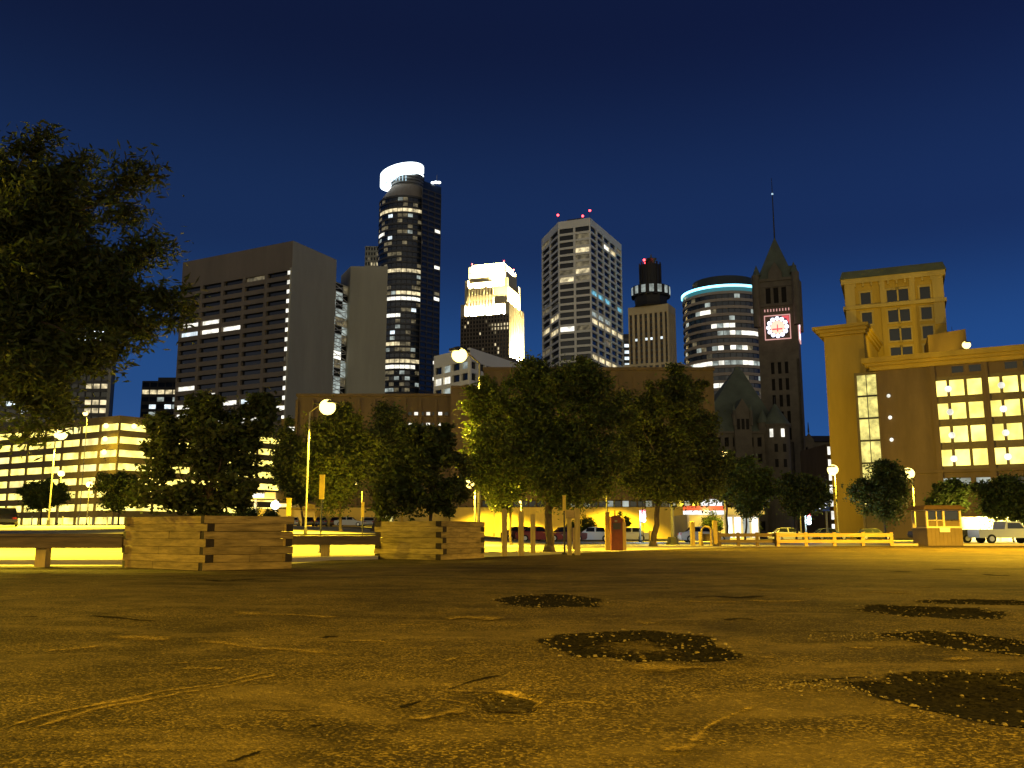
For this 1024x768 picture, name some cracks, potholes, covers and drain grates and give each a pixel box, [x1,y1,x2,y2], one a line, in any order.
pothole [796,628,1024,656]
pothole [490,593,613,609]
pothole [527,628,760,665]
pothole [727,667,1024,728]
pothole [838,604,1019,620]
